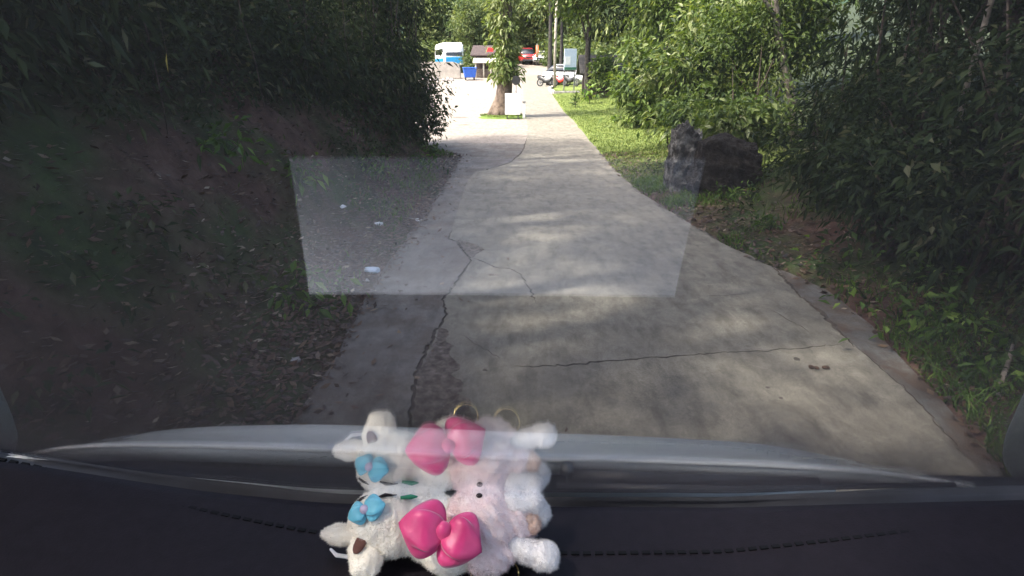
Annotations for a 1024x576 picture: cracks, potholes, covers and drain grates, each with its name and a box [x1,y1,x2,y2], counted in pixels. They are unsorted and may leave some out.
crack [407,230,536,427]
